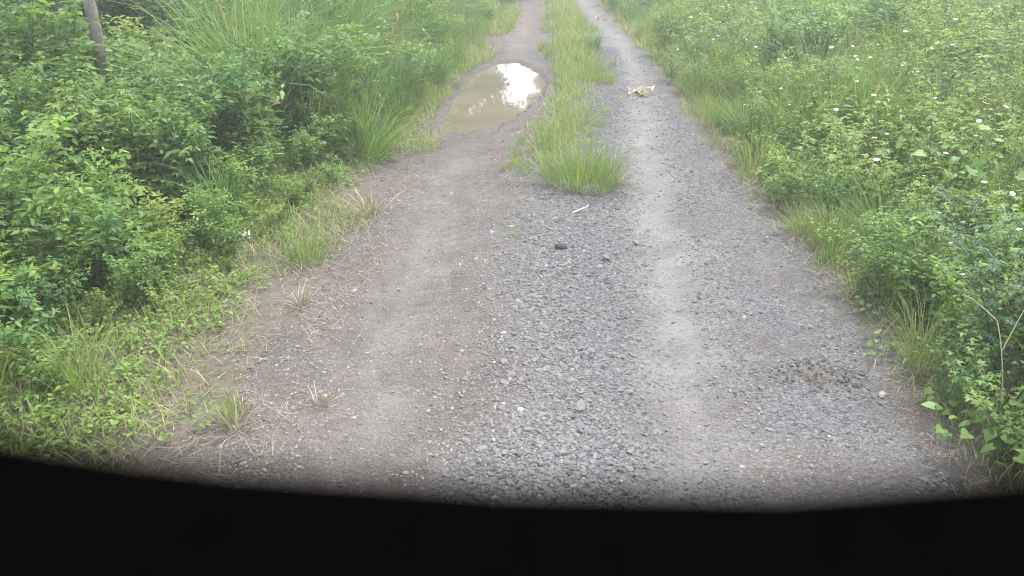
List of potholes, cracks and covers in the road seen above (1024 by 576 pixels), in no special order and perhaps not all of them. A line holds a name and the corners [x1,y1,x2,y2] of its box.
pothole [422,55,558,147]
